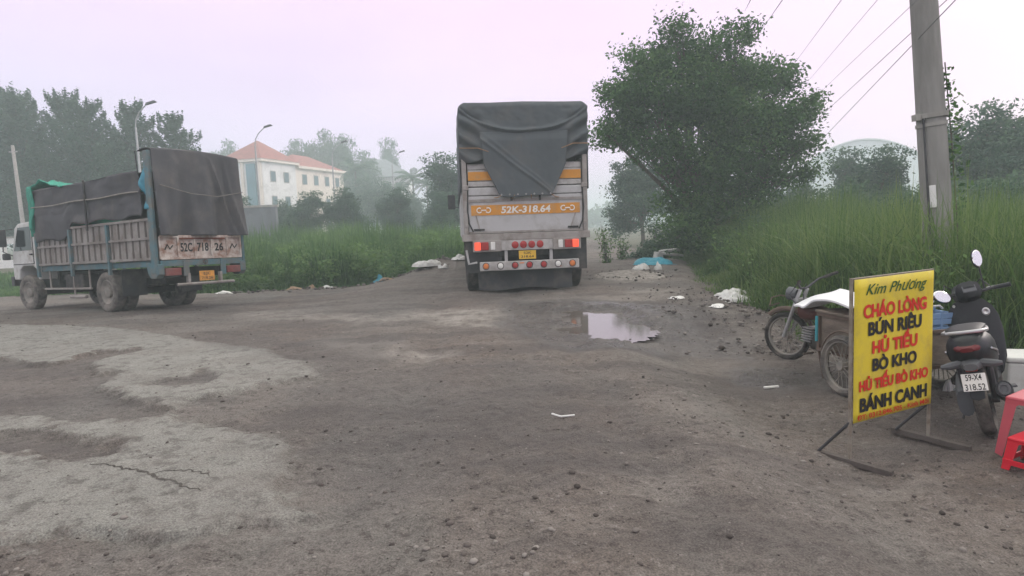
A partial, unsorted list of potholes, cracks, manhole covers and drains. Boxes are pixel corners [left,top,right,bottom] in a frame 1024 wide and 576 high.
pothole [542,304,659,342]
pothole [131,366,226,388]
pothole [0,420,142,464]
crack [89,463,209,490]
